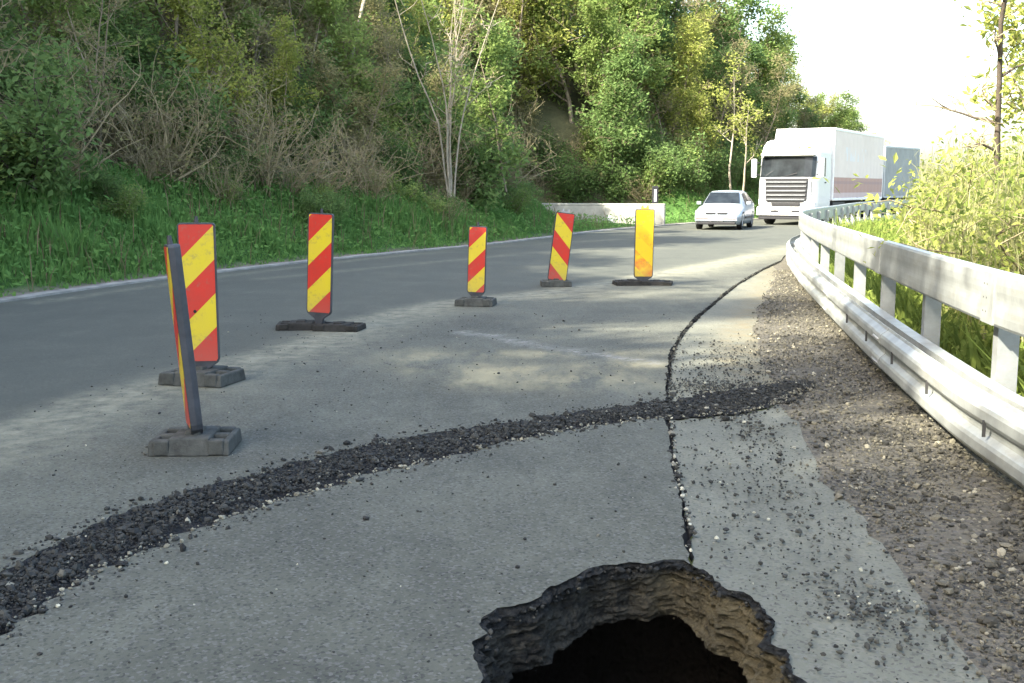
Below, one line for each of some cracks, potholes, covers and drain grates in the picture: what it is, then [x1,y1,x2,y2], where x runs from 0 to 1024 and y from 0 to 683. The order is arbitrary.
crack [0,261,817,646]
pothole [472,559,807,683]
